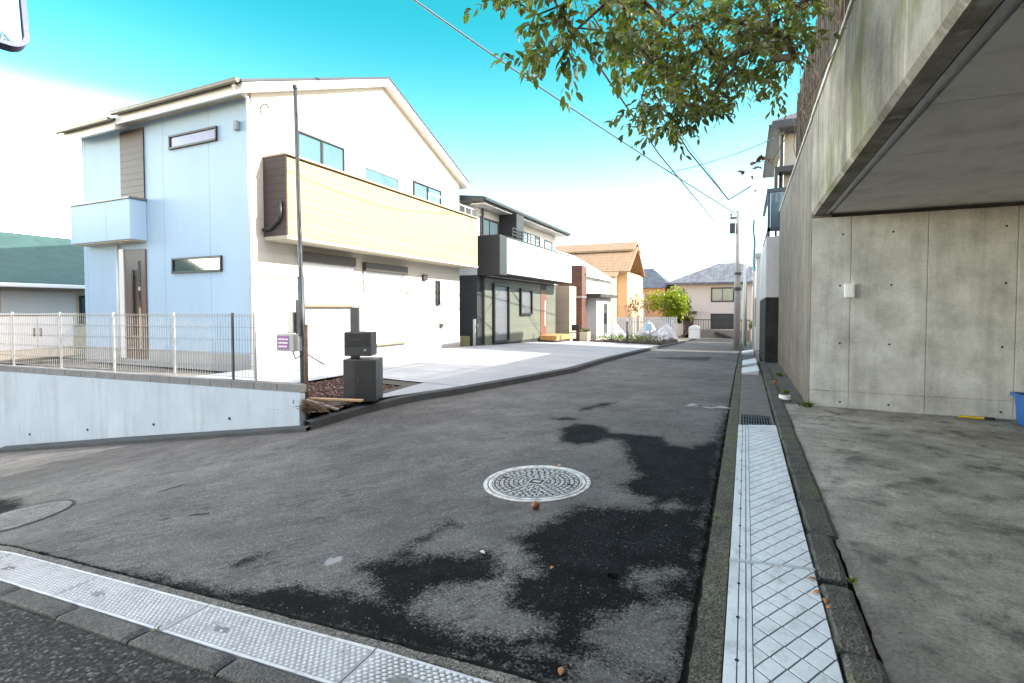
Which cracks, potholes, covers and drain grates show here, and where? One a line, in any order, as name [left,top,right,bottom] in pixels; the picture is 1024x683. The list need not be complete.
manhole cover [483,465,591,502]
manhole cover [0,500,76,531]
drain grate [738,413,775,425]
